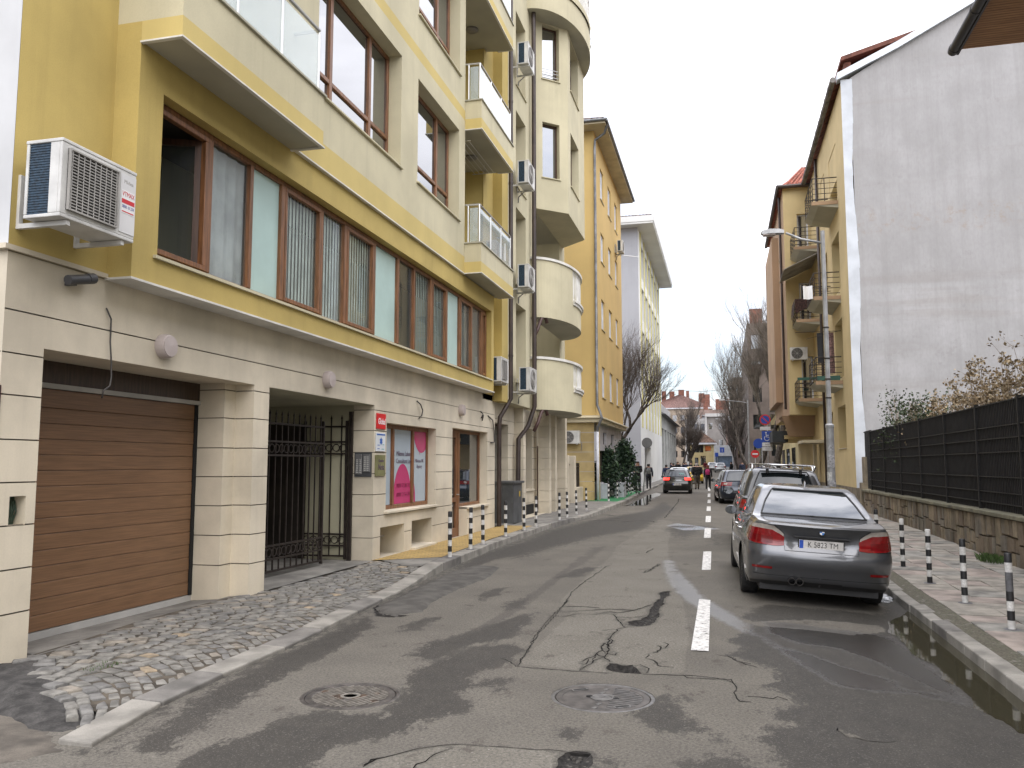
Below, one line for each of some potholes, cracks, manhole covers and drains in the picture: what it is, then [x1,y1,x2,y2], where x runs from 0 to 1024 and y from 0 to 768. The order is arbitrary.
pothole [606,663,641,674]
manhole cover [299,683,400,710]
pothole [628,591,670,626]
crack [363,745,592,768]
manhole cover [551,684,655,713]
crack [505,566,788,702]
pothole [556,751,593,768]
